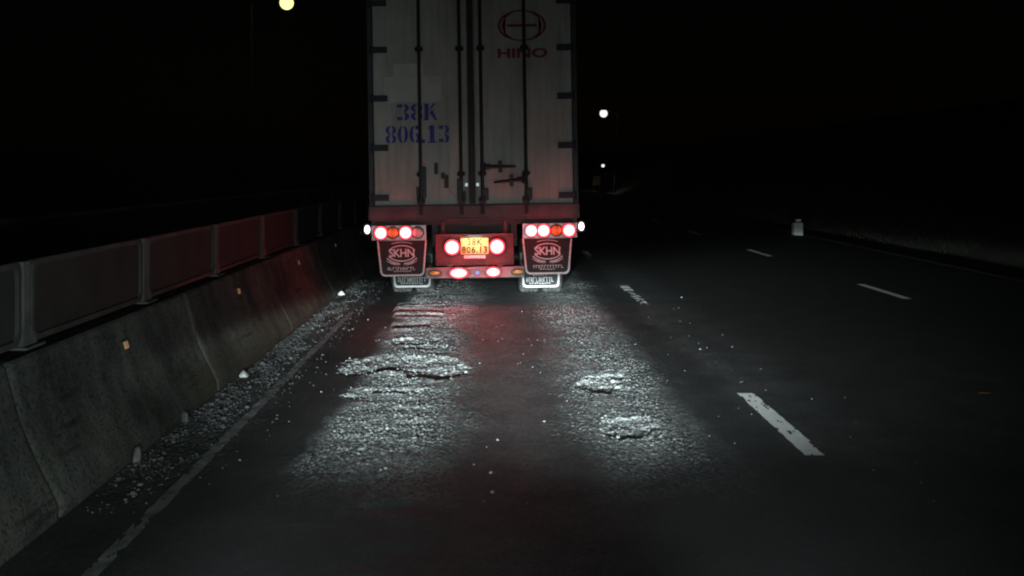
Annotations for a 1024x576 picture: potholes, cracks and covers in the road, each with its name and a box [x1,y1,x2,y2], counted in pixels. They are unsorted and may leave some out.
pothole [335,353,477,383]
pothole [339,386,424,400]
pothole [598,416,663,440]
pothole [574,372,627,394]
